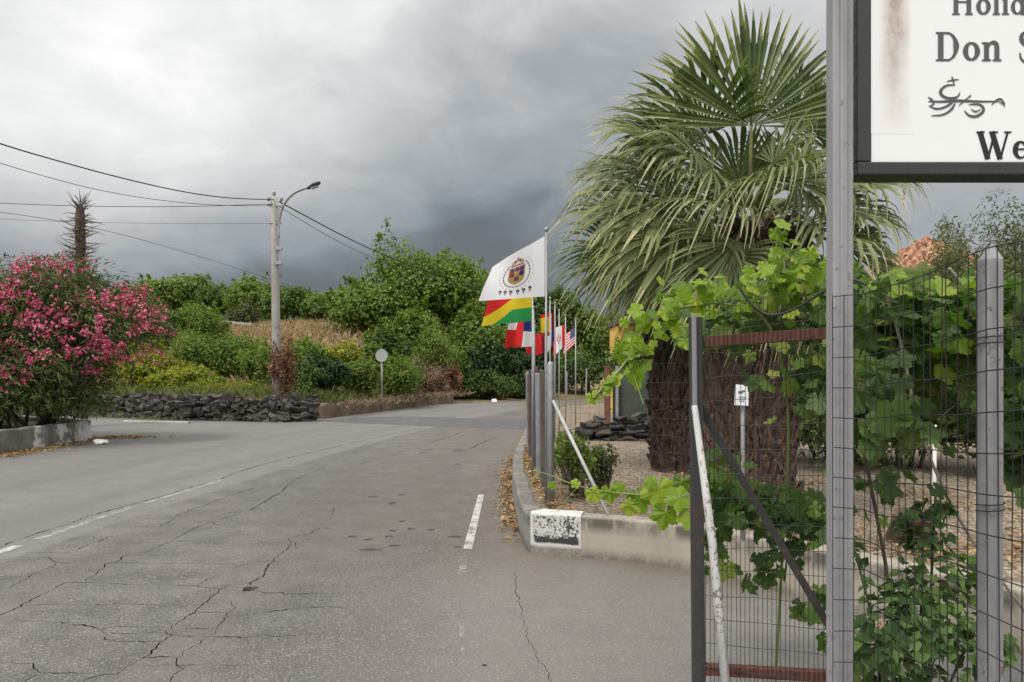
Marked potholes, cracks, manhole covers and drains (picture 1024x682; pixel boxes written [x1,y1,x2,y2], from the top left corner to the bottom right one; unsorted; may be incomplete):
crack [1,463,364,682]
